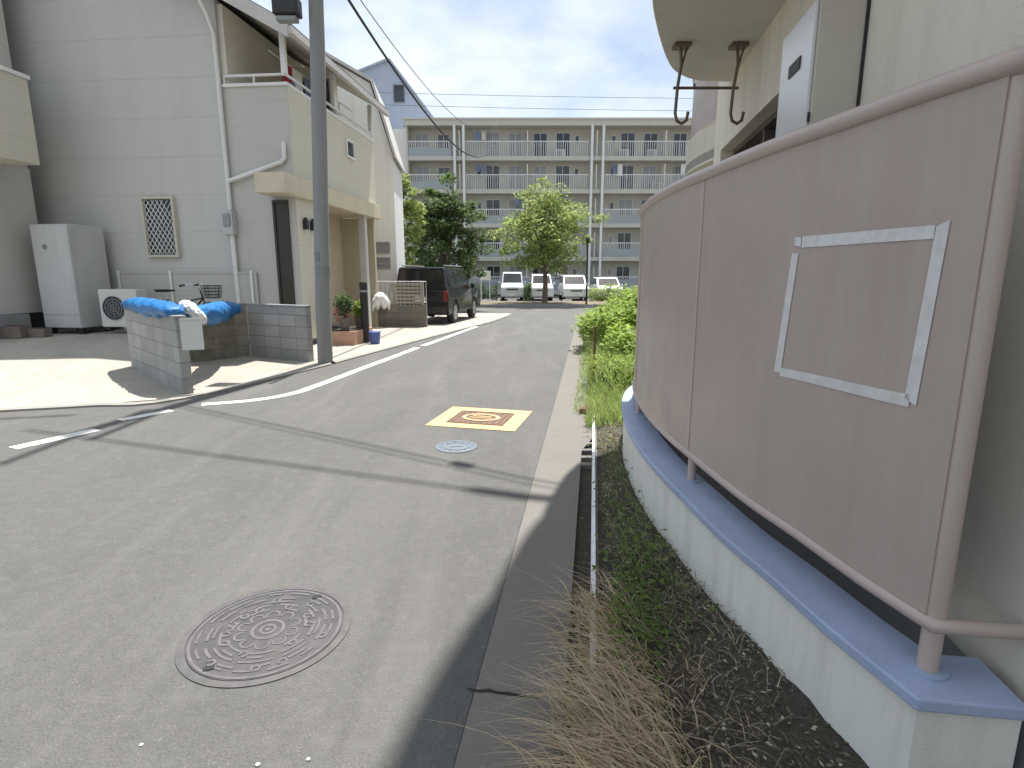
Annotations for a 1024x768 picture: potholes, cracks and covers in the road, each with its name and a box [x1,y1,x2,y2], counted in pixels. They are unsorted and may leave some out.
manhole cover [436,440,477,453]
manhole cover [175,586,352,688]
manhole cover [426,407,532,431]
